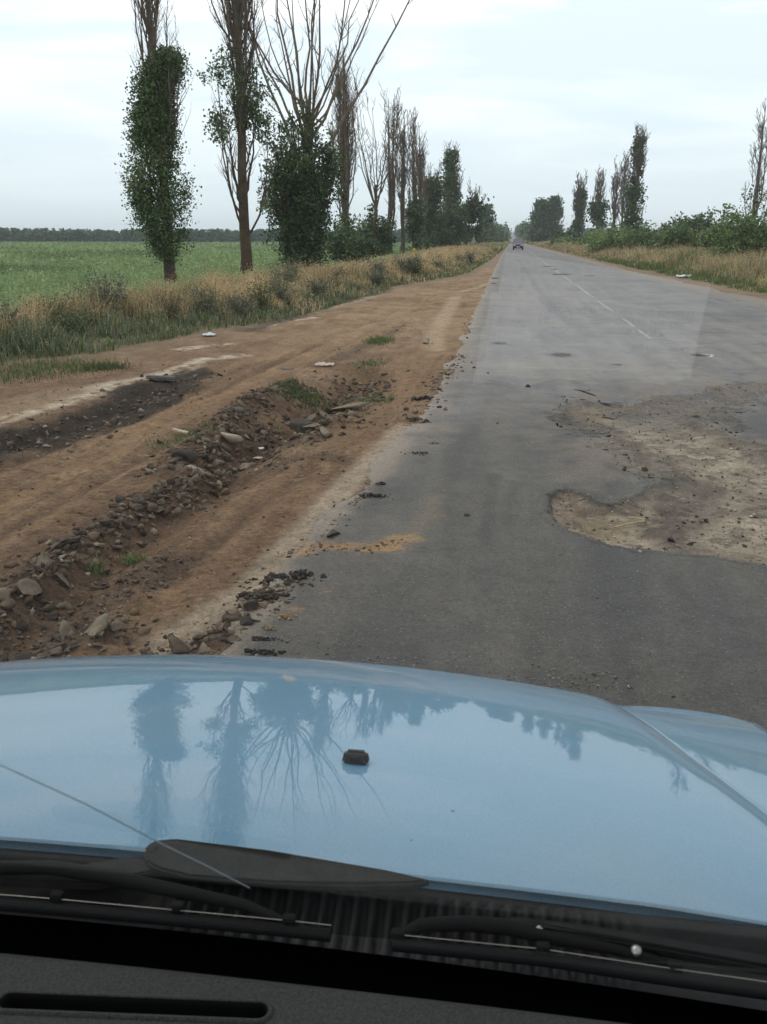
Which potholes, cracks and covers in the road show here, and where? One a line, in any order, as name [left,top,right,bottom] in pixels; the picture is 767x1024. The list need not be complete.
pothole [537,381,767,570]
